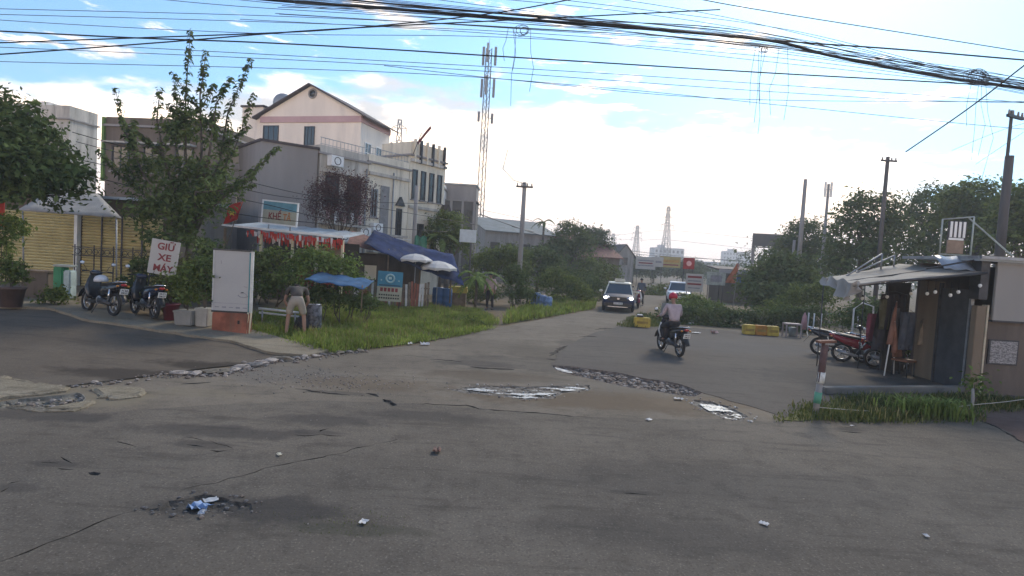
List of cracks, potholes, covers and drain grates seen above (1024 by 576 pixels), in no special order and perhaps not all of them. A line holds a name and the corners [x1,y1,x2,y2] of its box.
pothole [686,397,757,422]
pothole [0,393,86,408]
crack [0,511,135,562]
pothole [444,383,597,401]
crack [982,421,1024,443]
pothole [552,365,702,397]
pothole [134,490,263,519]
crack [182,428,397,490]
